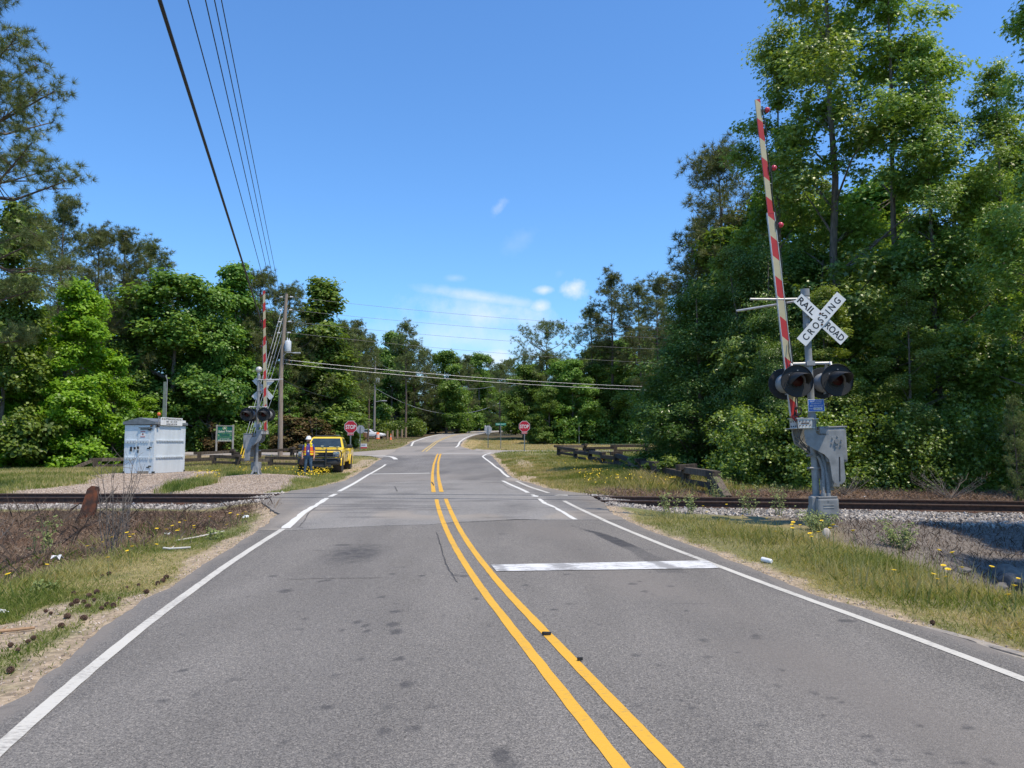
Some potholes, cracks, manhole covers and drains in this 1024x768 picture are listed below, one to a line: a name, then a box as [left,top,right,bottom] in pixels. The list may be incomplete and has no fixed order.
crack [436,532,457,582]
